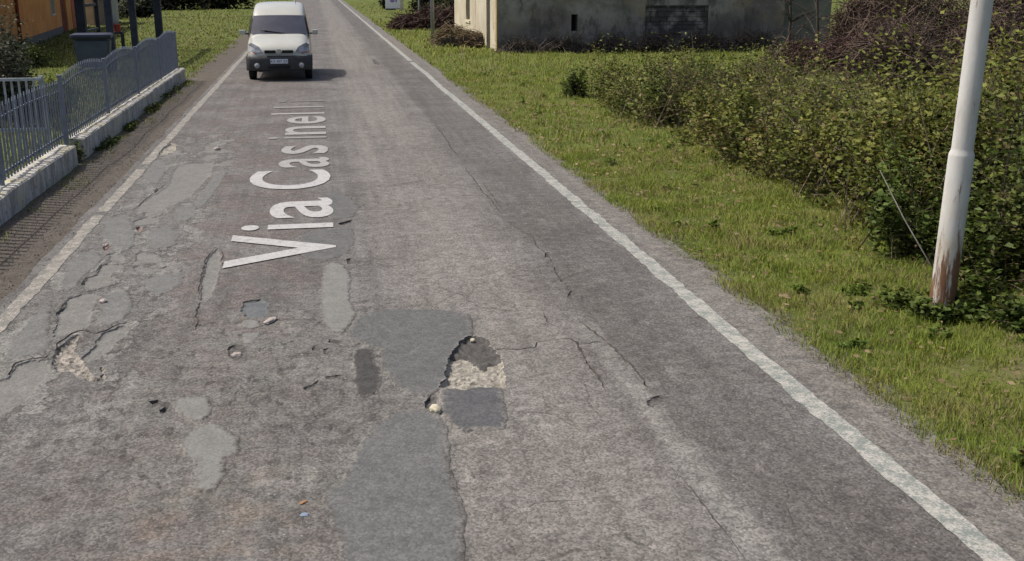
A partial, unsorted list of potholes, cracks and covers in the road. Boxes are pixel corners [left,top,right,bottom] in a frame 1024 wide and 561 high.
crack [496,314,661,397]
pothole [440,335,506,390]
pothole [240,299,270,318]
crack [7,252,132,376]
pothole [51,334,107,383]
crack [464,166,555,267]
pothole [227,344,247,360]
